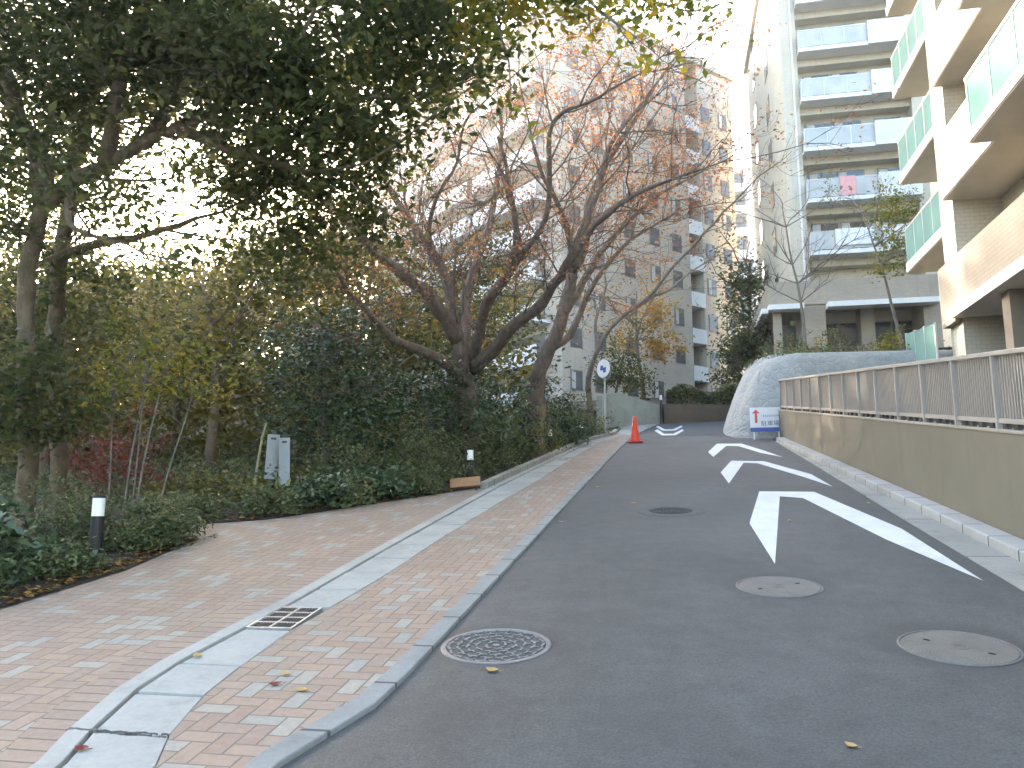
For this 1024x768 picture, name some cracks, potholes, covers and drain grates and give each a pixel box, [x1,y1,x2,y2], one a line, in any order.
manhole cover [441,628,551,665]
drain grate [245,606,323,632]
manhole cover [897,630,1024,667]
manhole cover [736,576,824,598]
crack [66,727,169,738]
manhole cover [637,506,705,517]
